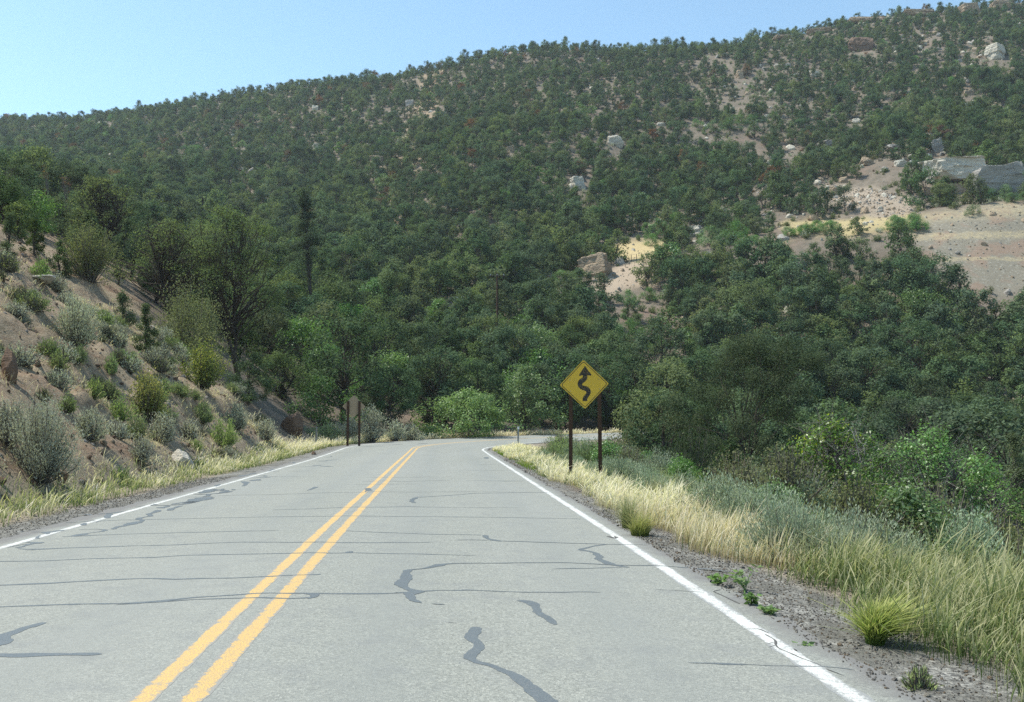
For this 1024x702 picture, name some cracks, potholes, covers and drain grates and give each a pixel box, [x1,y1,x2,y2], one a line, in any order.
crack [688,628,852,675]
